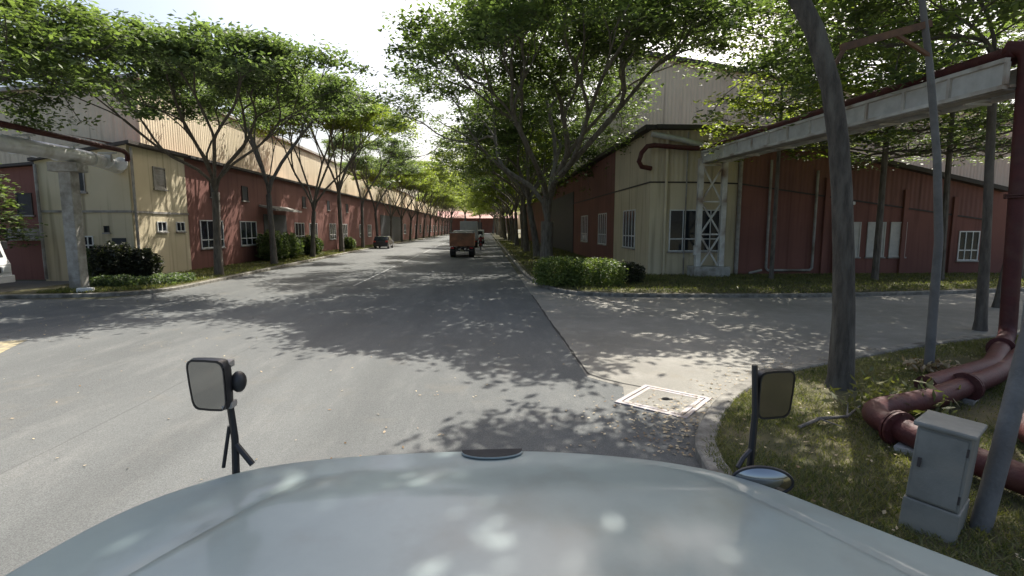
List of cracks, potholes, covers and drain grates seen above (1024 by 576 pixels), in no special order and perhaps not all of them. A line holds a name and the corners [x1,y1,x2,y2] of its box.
manhole cover [614,384,712,419]
